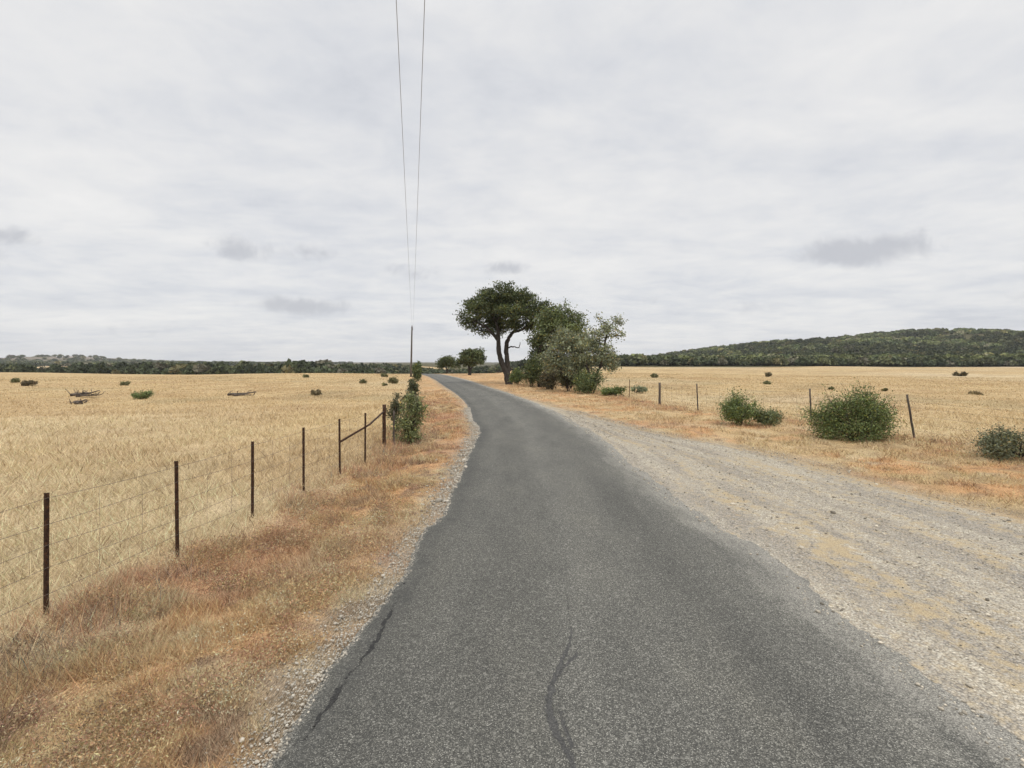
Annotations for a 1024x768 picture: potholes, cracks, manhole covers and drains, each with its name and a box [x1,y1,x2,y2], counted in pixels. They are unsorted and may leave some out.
crack [302,578,408,741]
crack [544,601,579,768]
